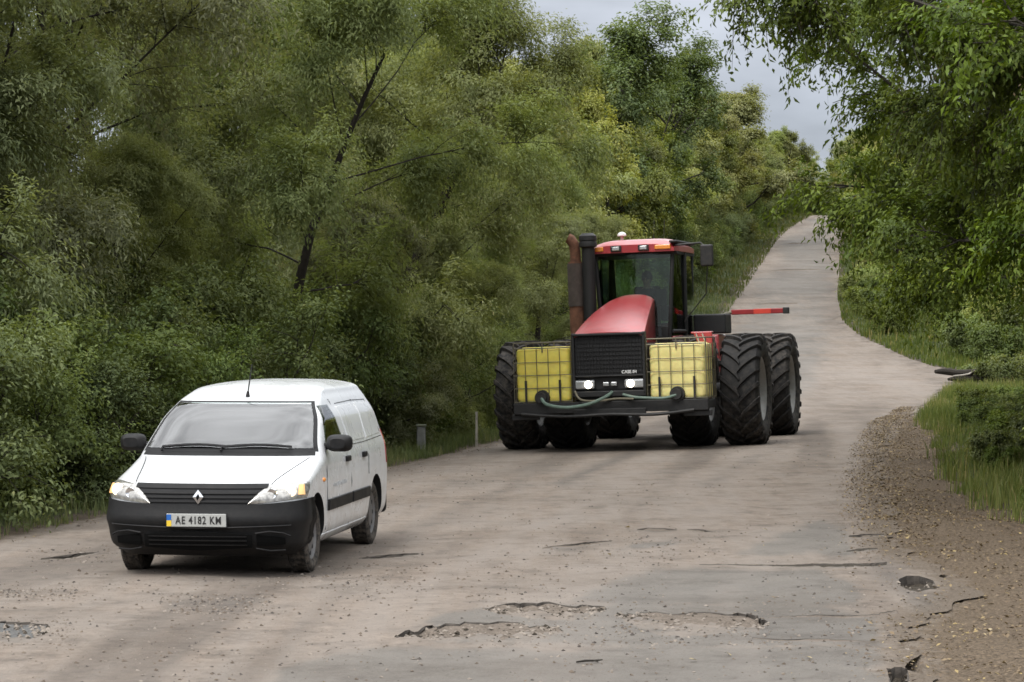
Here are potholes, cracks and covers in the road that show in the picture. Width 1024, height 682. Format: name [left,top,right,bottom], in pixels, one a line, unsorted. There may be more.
crack [699,534,887,568]
pothole [614,611,768,638]
pothole [482,602,606,622]
crack [542,540,612,549]
crack [41,552,98,560]
pothole [897,576,940,592]
pothole [886,667,910,682]
pothole [393,621,564,646]
pothole [0,620,52,644]
